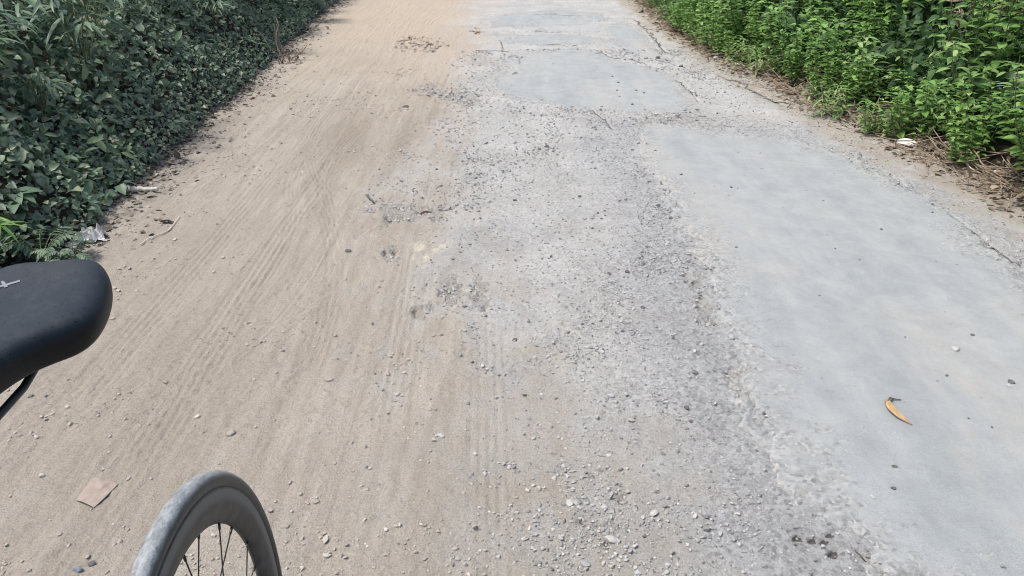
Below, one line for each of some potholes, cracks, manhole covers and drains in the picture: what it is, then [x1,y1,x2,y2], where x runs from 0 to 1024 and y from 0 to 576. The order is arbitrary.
pothole [363,200,455,230]
crack [950,215,1021,267]
crack [605,20,698,102]
pothole [394,36,449,53]
crack [719,76,791,108]
